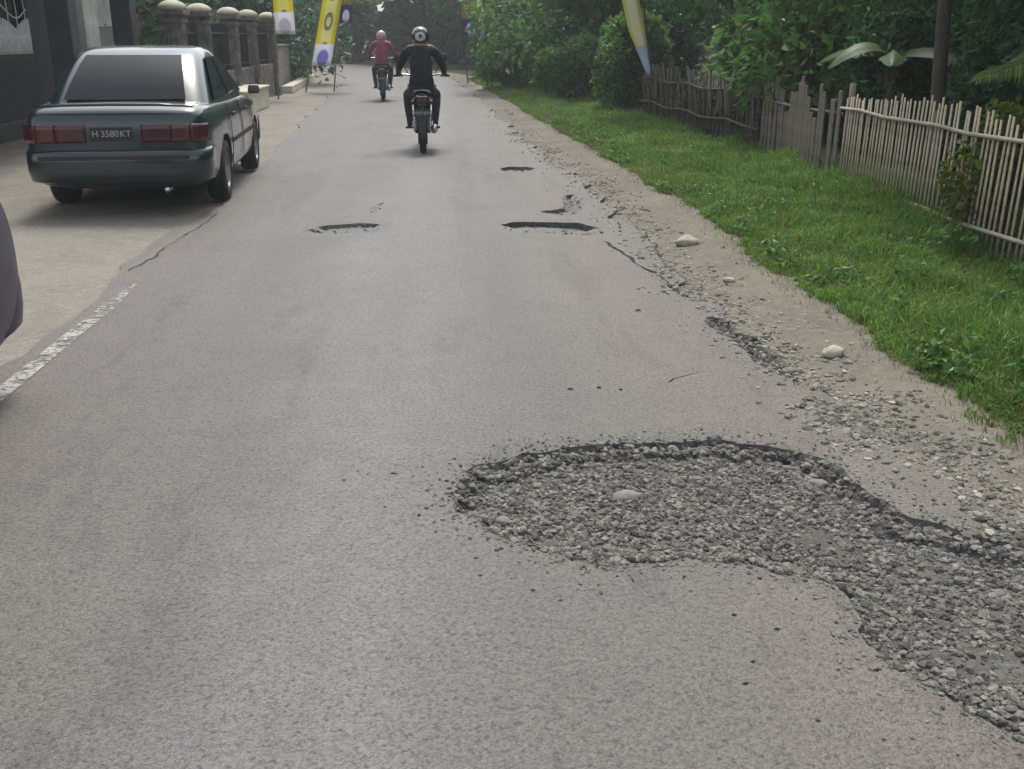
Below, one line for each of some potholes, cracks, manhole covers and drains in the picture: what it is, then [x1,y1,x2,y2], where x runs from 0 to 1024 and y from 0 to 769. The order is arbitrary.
pothole [301,223,385,234]
pothole [704,317,790,374]
pothole [542,195,584,215]
crack [604,241,694,299]
crack [128,214,217,272]
pothole [451,435,1024,746]
pothole [500,222,604,236]
